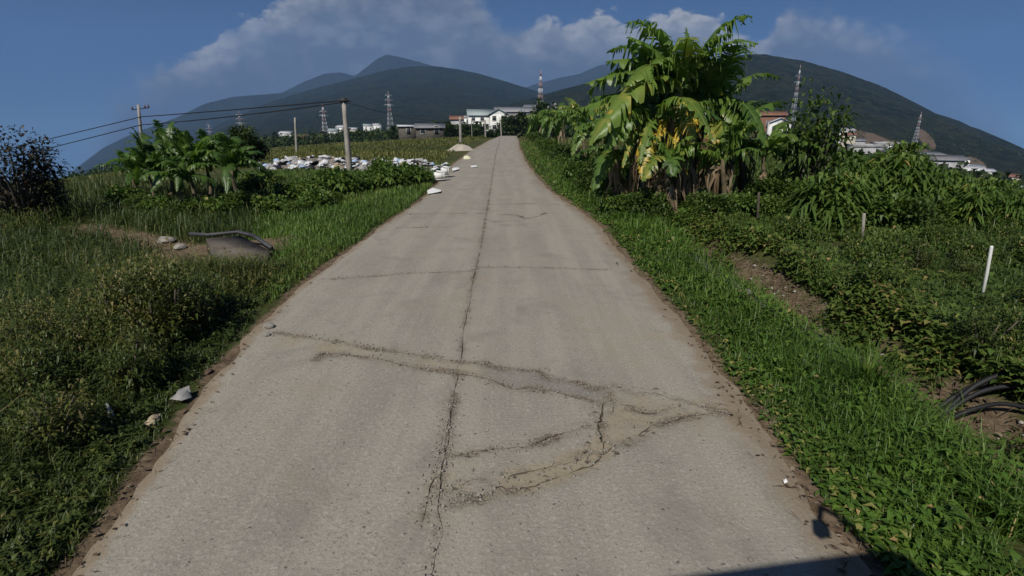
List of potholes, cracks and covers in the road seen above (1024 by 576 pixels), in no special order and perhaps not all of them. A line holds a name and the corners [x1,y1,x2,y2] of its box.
crack [286,156,731,576]
